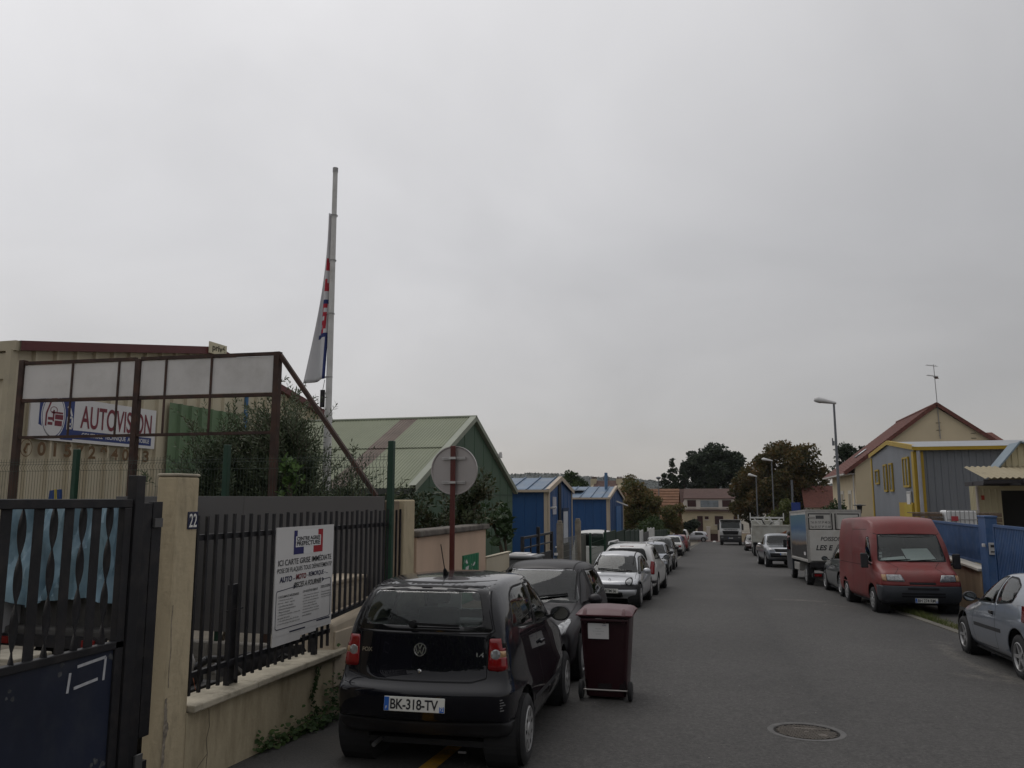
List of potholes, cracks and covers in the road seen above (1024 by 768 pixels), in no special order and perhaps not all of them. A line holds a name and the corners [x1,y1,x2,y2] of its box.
manhole cover [767,722,847,742]
